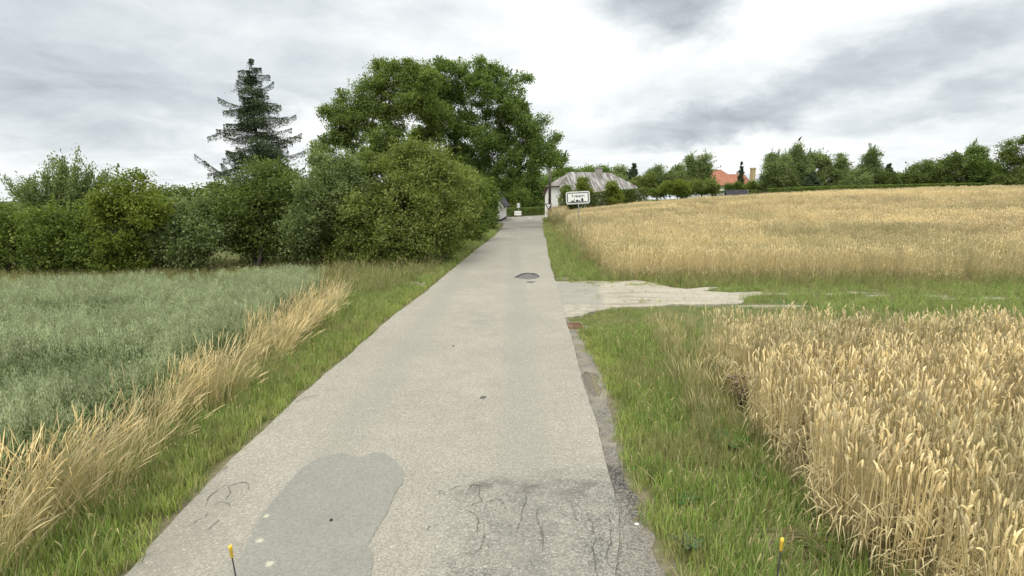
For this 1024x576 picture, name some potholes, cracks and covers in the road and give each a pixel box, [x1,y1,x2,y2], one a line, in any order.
crack [191,482,250,531]
pothole [583,371,602,397]
crack [427,474,612,575]
